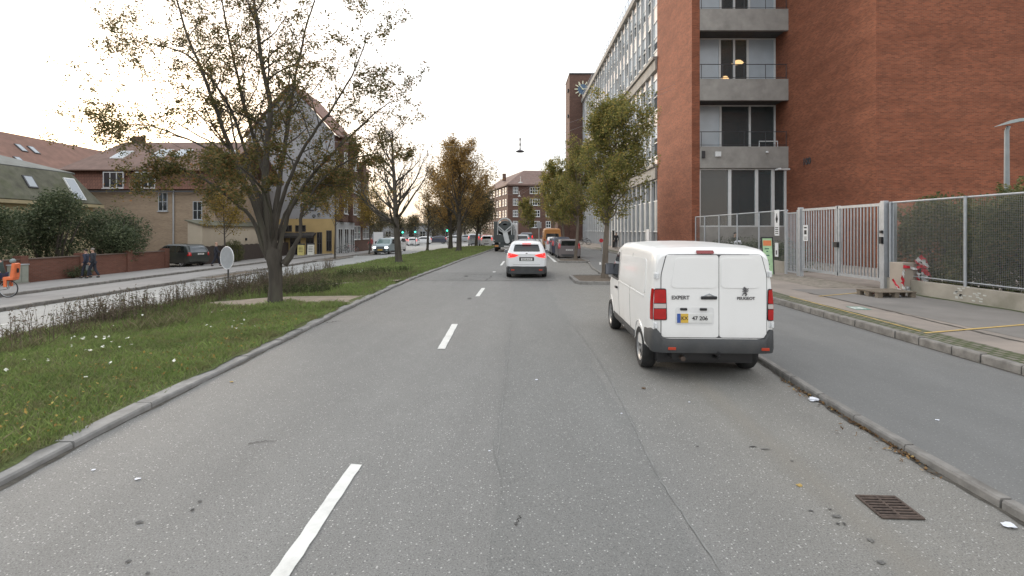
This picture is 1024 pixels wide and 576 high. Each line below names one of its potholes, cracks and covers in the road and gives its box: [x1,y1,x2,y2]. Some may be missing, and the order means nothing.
drain grate [855,495,926,520]
